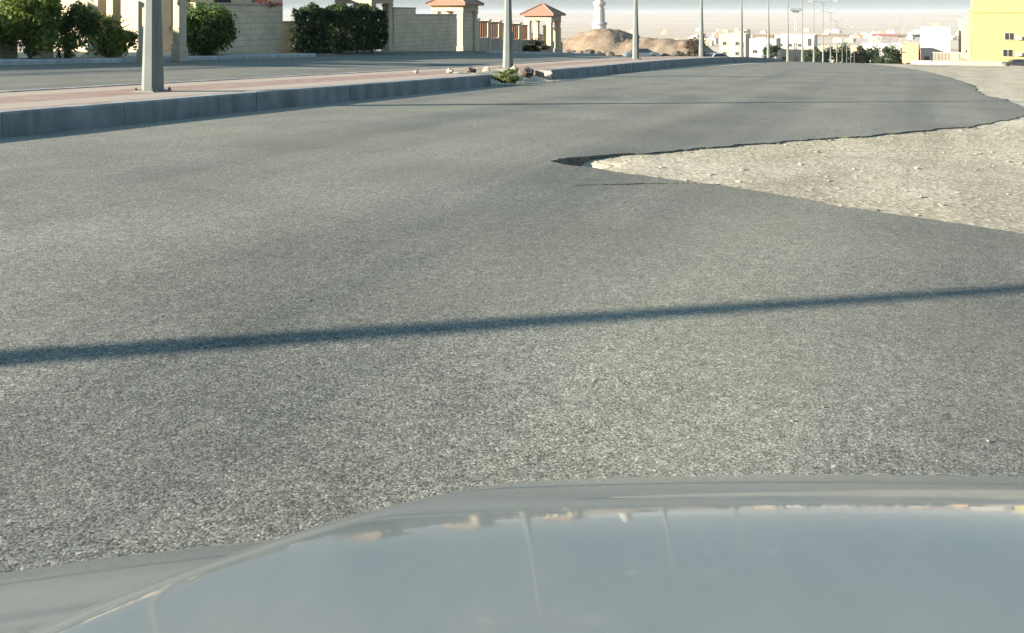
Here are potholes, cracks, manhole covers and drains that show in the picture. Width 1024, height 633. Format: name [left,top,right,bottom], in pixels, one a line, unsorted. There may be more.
pothole [581,160,615,170]
